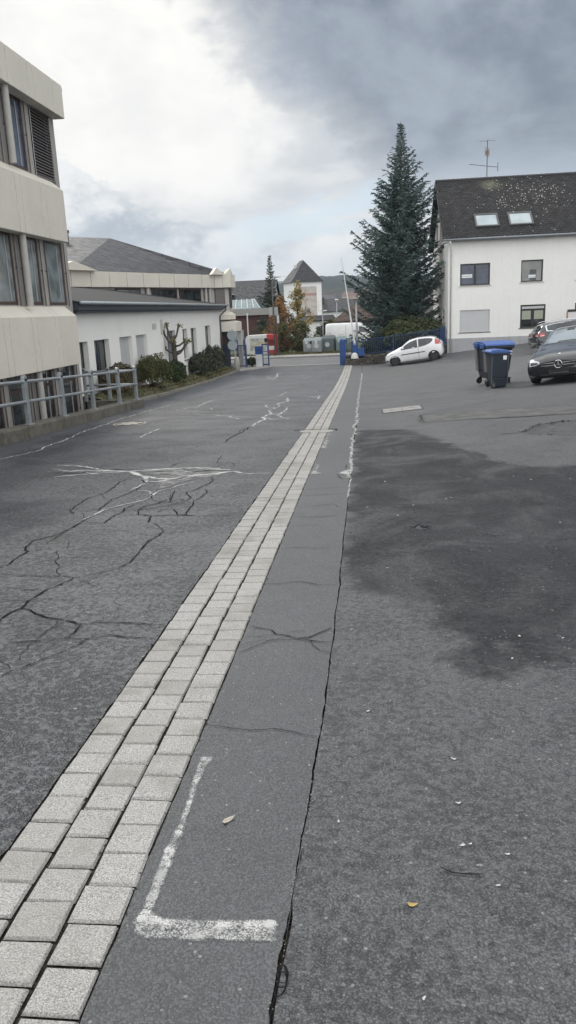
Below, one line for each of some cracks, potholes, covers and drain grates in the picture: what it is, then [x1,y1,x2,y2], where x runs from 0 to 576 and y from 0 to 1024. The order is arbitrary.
crack [0,372,320,675]
